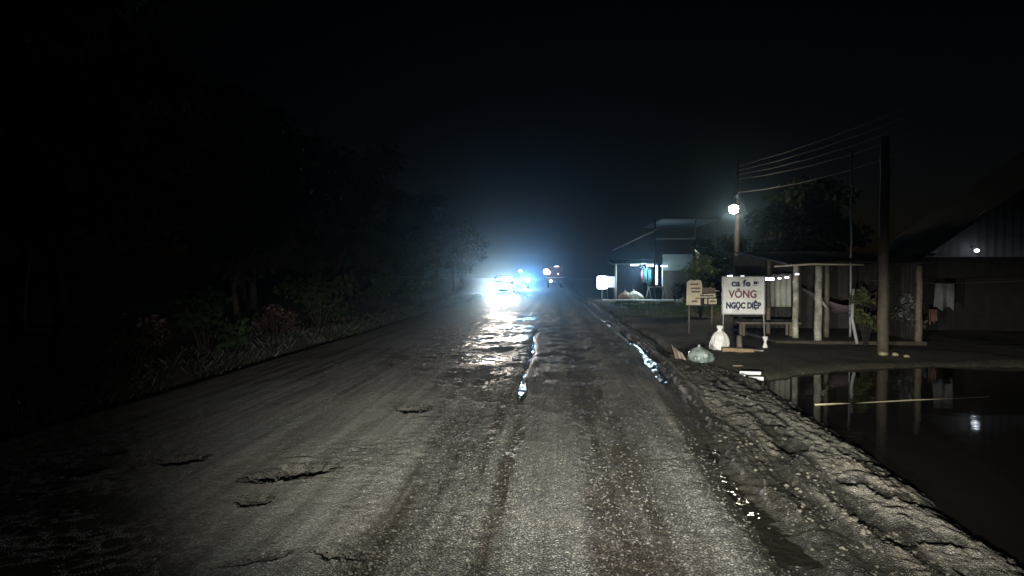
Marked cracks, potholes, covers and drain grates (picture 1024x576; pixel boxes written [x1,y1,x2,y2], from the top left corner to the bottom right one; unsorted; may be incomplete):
pothole [148,453,213,467]
pothole [233,493,276,507]
pothole [233,461,344,484]
pothole [394,404,438,414]
